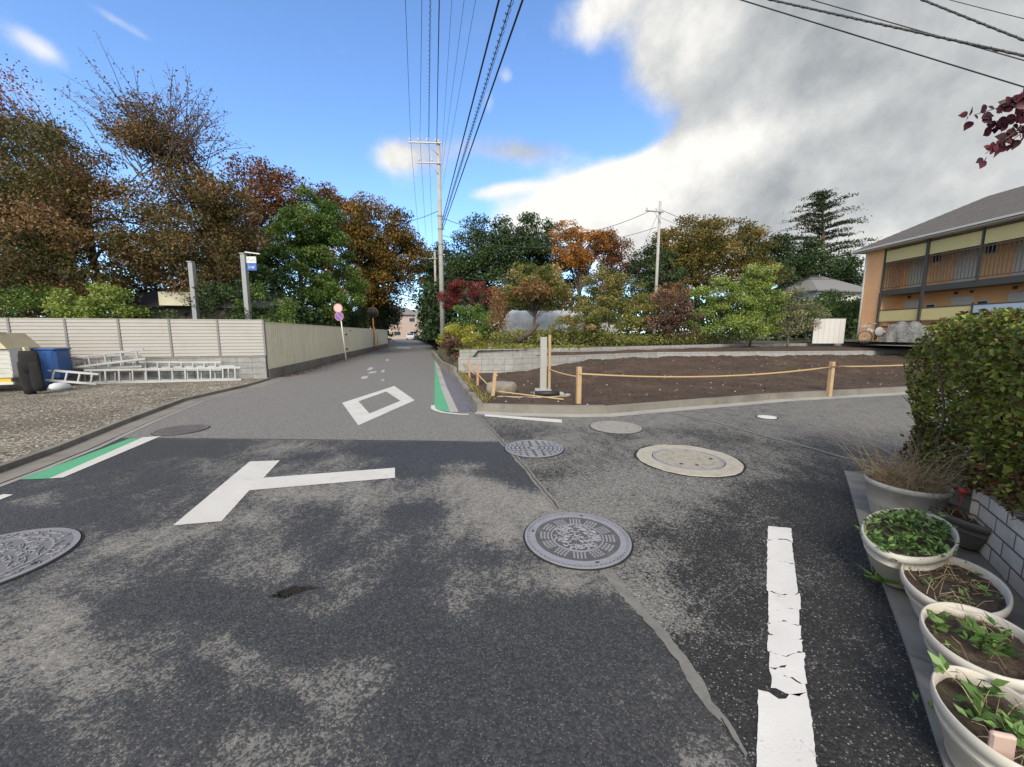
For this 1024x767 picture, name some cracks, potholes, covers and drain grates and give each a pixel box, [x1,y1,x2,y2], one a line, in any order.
manhole cover [0,528,84,584]
pothole [268,585,318,599]
manhole cover [633,444,747,478]
manhole cover [589,421,643,434]
manhole cover [504,440,564,458]
manhole cover [151,424,210,436]
manhole cover [523,512,634,571]
